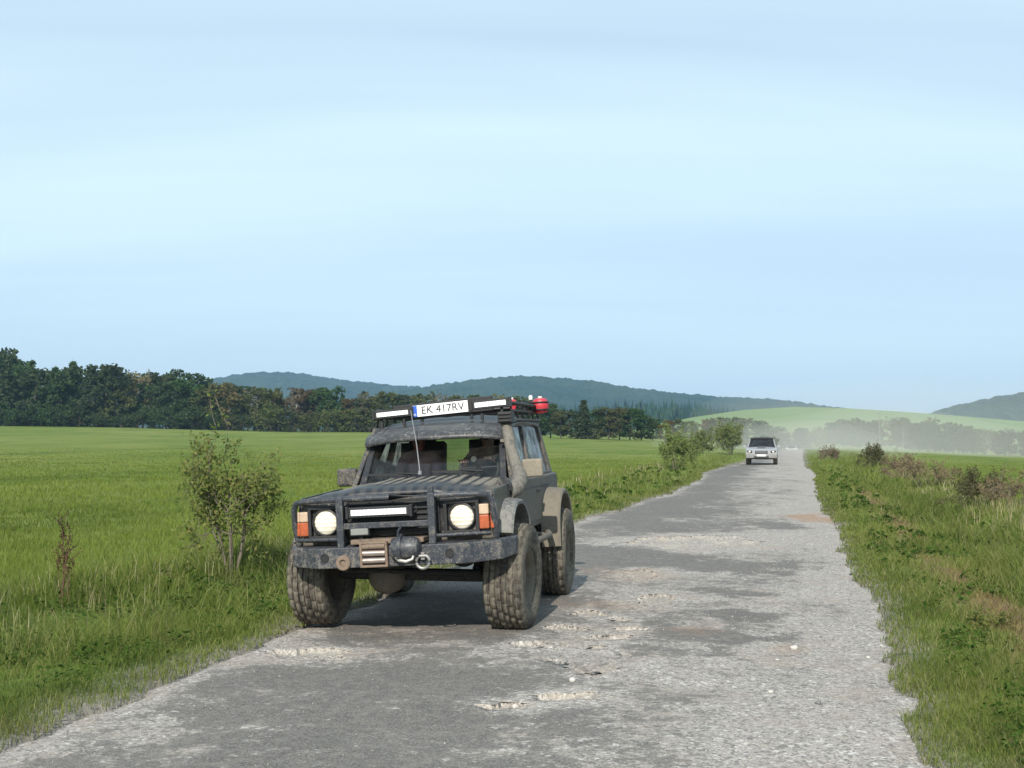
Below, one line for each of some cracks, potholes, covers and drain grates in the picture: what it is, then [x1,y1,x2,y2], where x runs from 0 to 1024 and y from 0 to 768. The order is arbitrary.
pothole [457,699,544,713]
pothole [533,622,601,635]
pothole [517,690,618,706]
pothole [619,567,661,584]
pothole [494,640,592,652]
pothole [250,646,362,663]
pothole [631,592,680,609]
